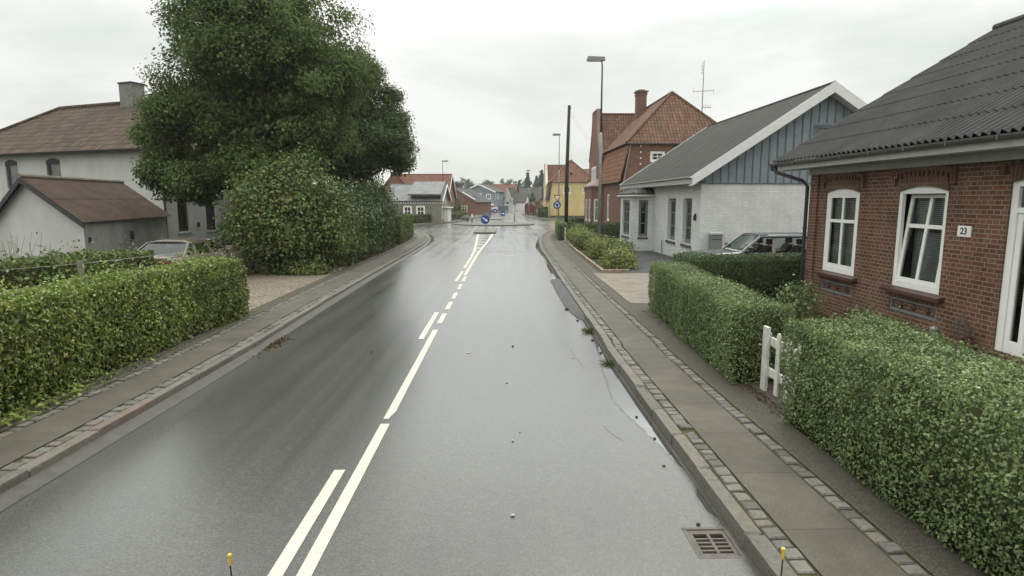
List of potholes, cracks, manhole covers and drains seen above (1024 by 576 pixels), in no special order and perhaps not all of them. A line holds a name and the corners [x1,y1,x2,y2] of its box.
drain grate [681,527,746,559]
